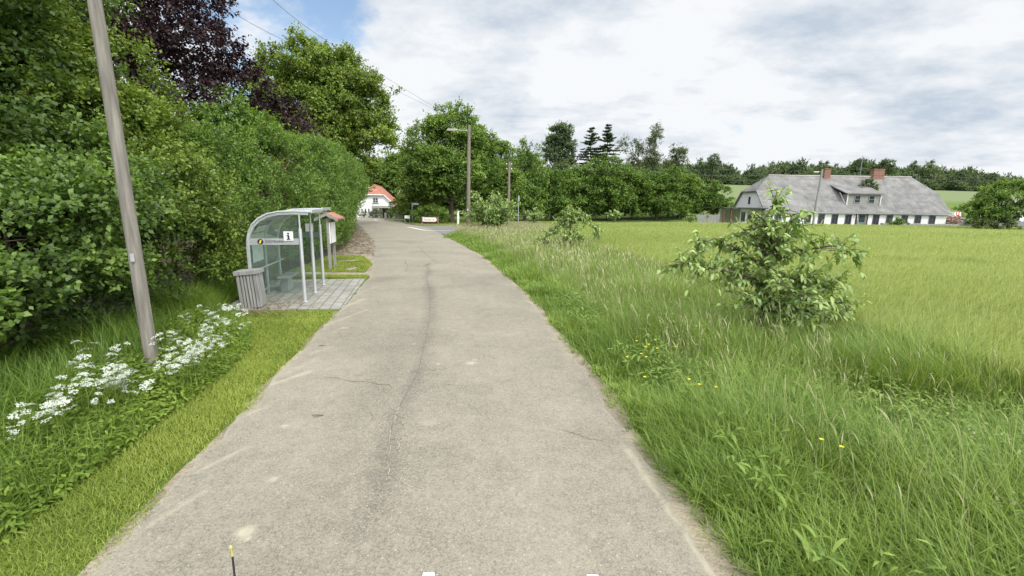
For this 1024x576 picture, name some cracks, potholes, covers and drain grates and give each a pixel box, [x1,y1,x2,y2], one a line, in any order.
crack [369,239,434,513]
